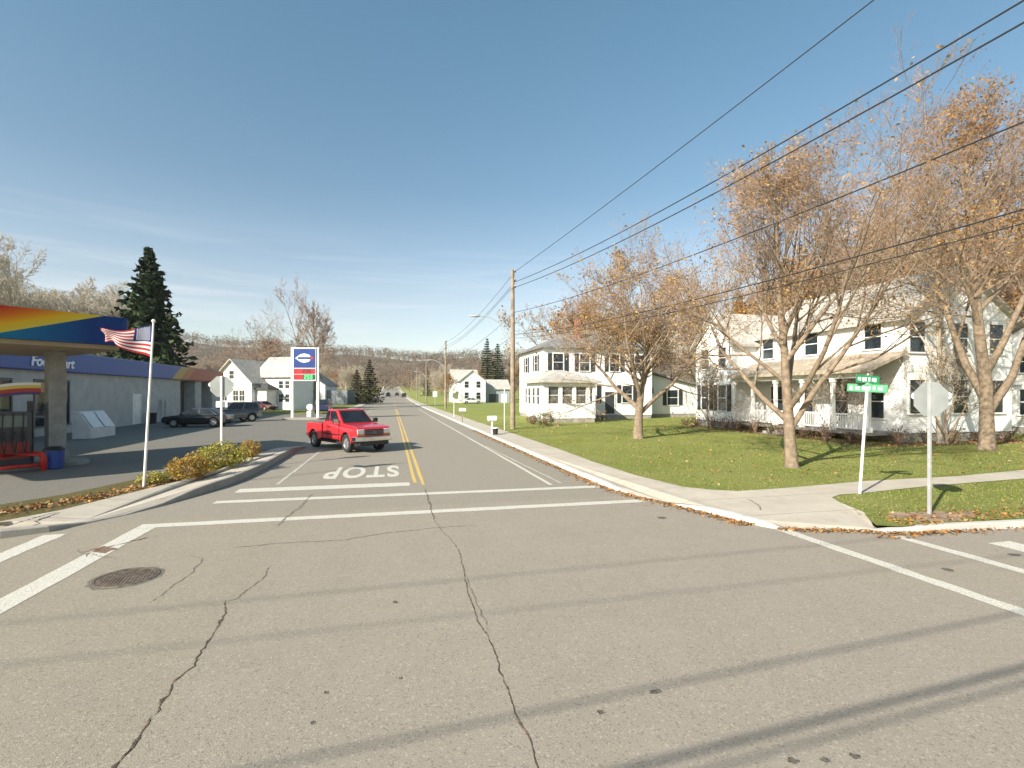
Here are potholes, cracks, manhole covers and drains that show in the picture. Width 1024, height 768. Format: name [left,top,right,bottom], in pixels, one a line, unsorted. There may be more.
crack [111,566,271,768]
manhole cover [85,566,165,590]
